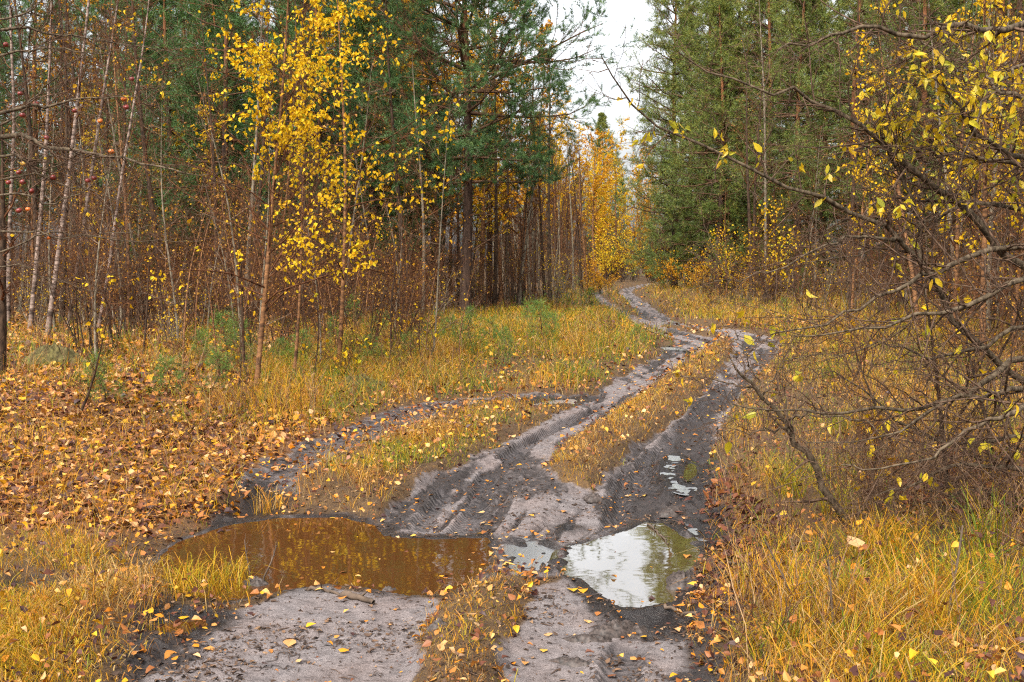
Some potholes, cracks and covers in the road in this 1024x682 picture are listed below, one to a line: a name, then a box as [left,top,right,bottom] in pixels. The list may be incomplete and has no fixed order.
pothole [149,515,504,601]
pothole [548,520,706,609]
pothole [658,452,699,497]
pothole [495,535,563,574]
